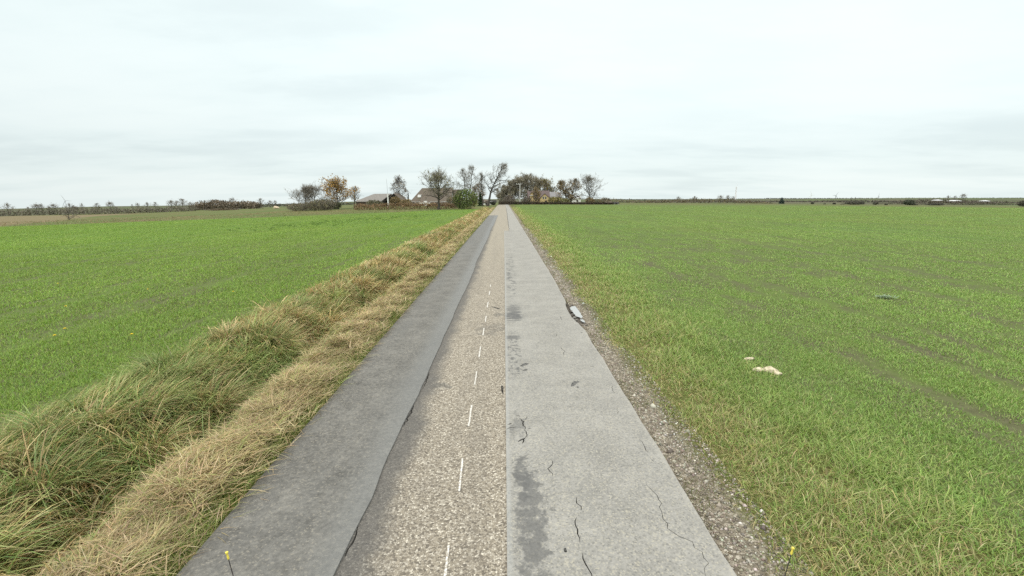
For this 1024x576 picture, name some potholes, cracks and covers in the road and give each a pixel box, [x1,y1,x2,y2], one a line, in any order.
crack [645,479,709,571]
crack [575,498,592,576]
